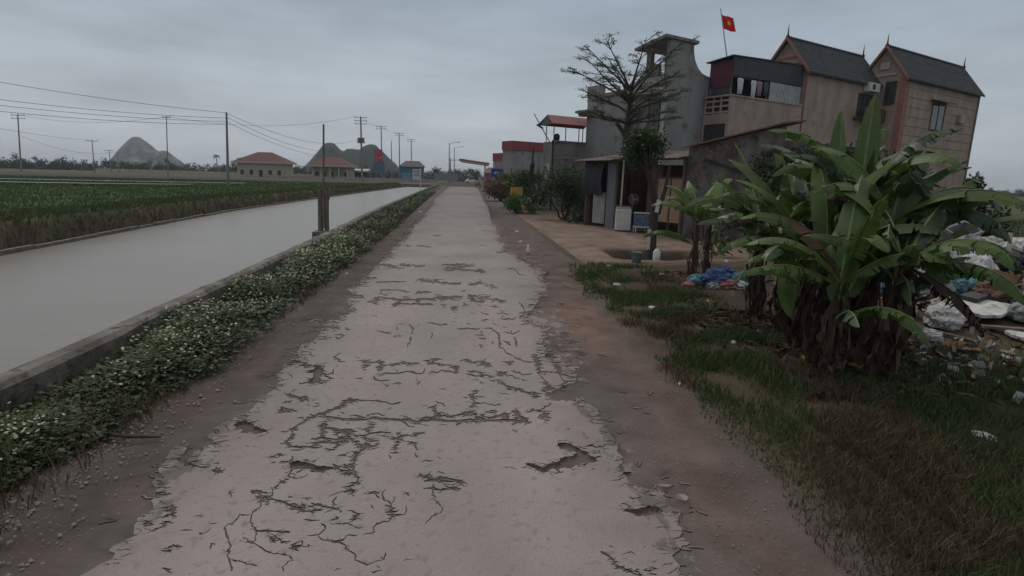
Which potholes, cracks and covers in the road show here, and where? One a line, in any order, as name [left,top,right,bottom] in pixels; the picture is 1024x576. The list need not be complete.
pothole [287,360,334,386]
pothole [619,496,669,516]
crack [136,224,577,573]
pothole [521,439,602,476]
pothole [282,459,339,475]
crack [601,545,660,576]
pothole [233,419,272,437]
